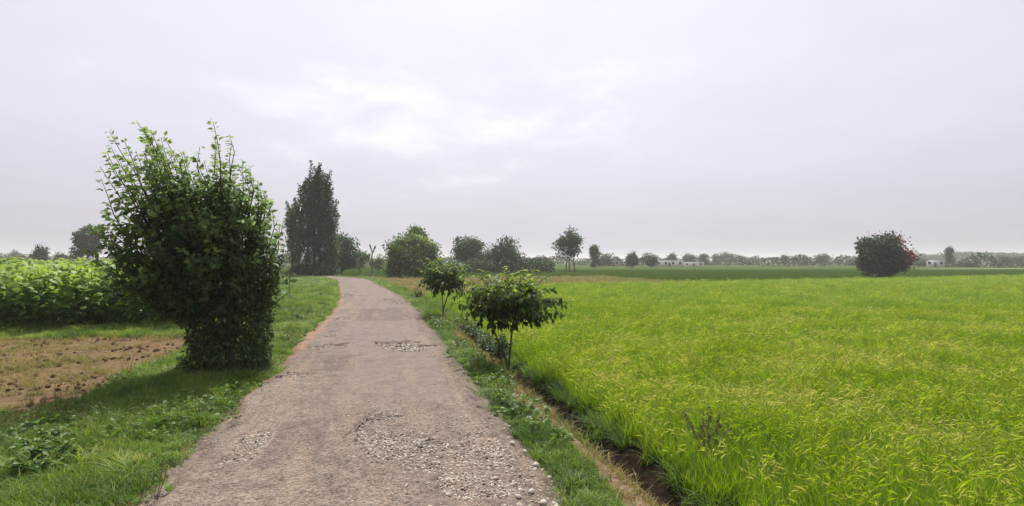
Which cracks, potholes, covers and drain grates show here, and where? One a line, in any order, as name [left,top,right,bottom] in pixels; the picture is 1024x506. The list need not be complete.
pothole [304,343,349,351]
pothole [215,429,274,465]
pothole [372,340,439,353]
pothole [351,411,535,503]
